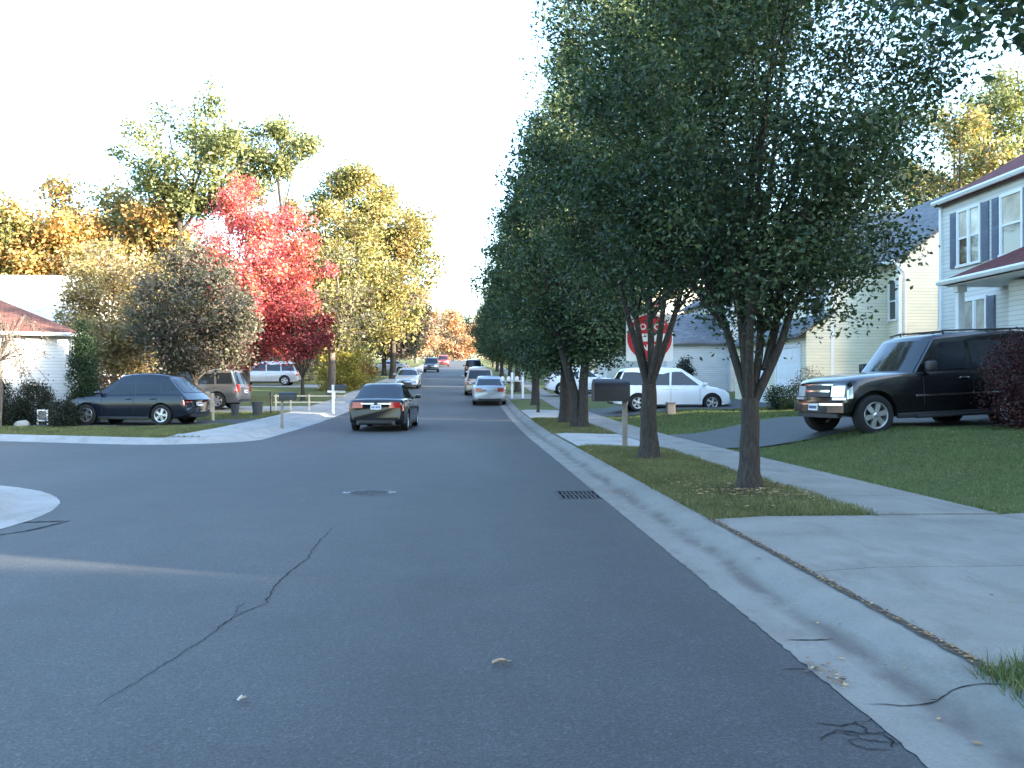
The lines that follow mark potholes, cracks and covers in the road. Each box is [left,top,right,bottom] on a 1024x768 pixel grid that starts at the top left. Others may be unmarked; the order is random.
crack [821,683,992,750]
drain grate [554,491,603,499]
crack [0,521,68,535]
crack [99,526,336,705]
